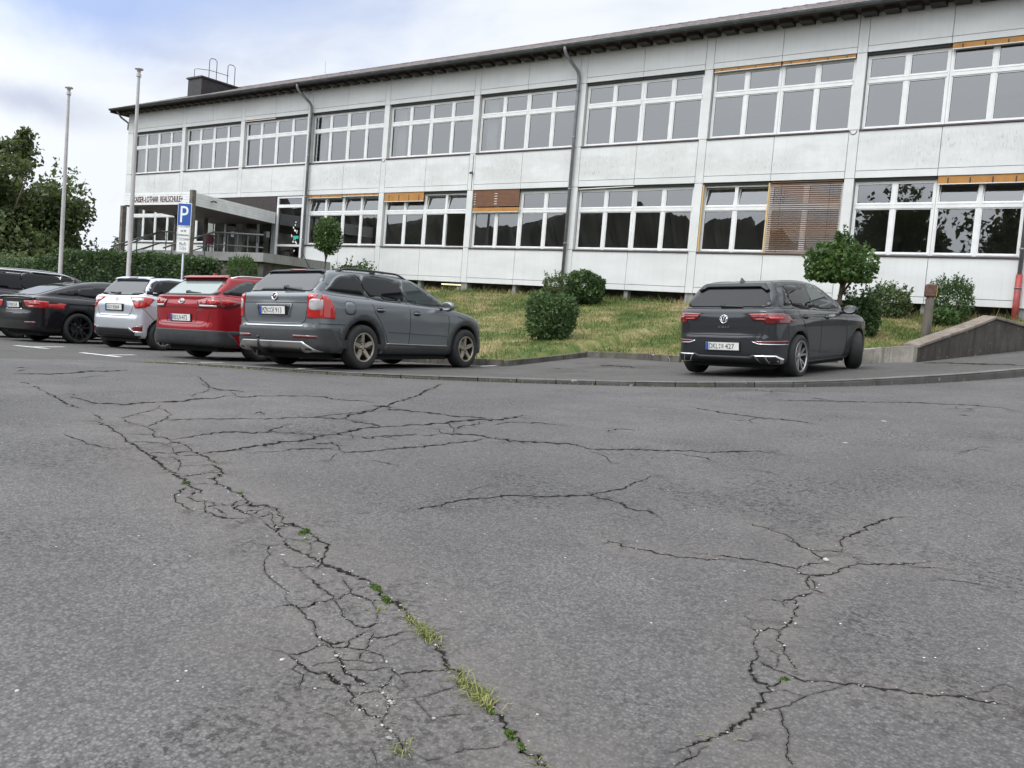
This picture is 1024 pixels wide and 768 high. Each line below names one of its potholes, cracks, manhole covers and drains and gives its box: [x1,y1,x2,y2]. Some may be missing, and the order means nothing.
crack [694,407,808,423]
crack [95,406,547,767]
crack [609,517,998,766]
crack [408,476,658,516]
crack [14,367,767,465]
